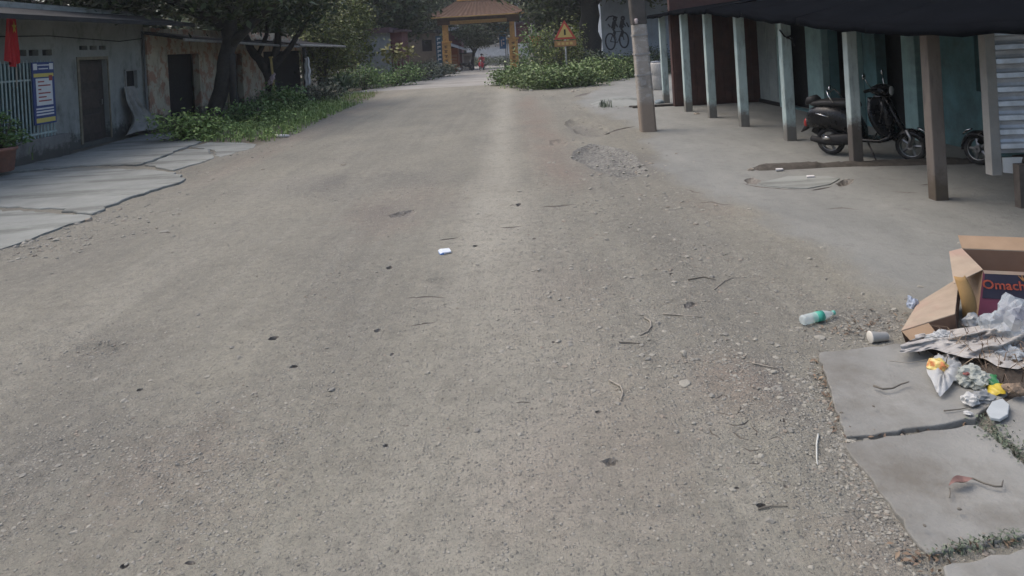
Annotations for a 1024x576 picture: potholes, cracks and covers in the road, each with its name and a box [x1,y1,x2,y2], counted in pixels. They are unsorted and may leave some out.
manhole cover [758,176,840,189]
pothole [570,143,649,179]
pothole [565,118,611,138]
